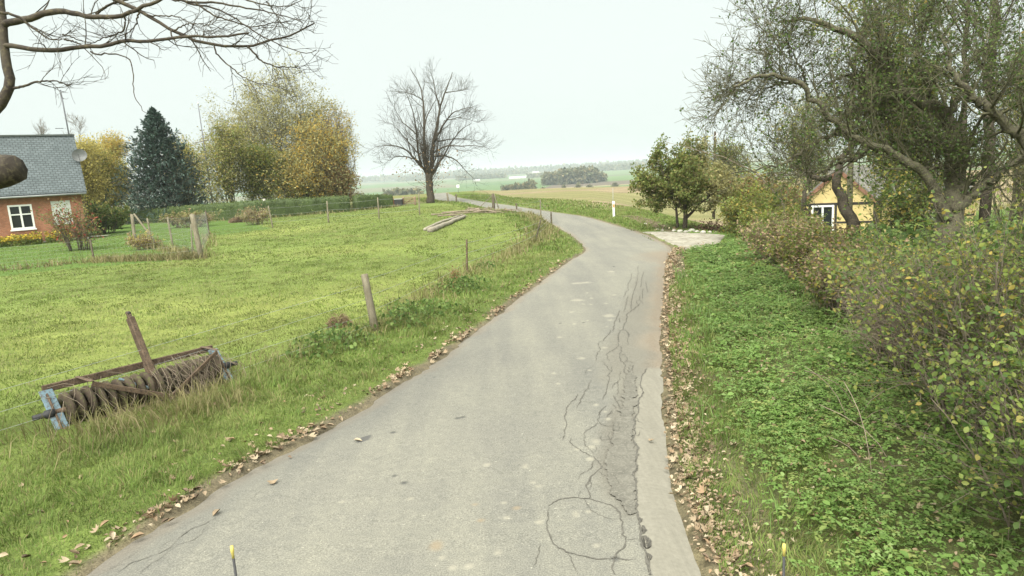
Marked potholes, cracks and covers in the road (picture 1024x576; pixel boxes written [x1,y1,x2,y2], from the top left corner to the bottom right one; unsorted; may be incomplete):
crack [106,518,213,575]
crack [533,270,648,574]
